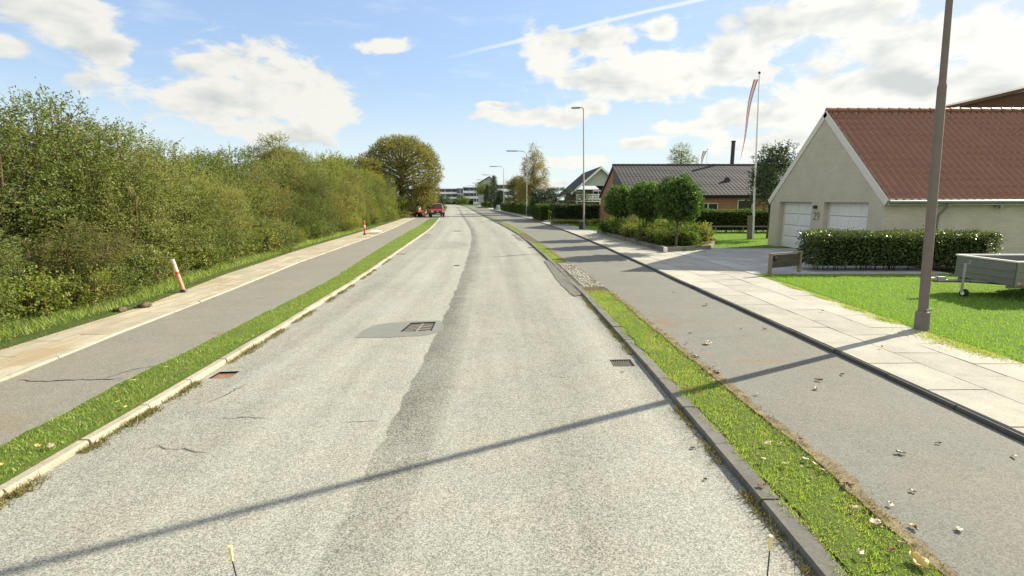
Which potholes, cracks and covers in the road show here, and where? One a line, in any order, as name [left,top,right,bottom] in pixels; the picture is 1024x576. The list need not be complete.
crack [26,366,153,382]
drain grate [610,359,635,367]
drain grate [400,322,436,332]
drain grate [208,371,239,379]
